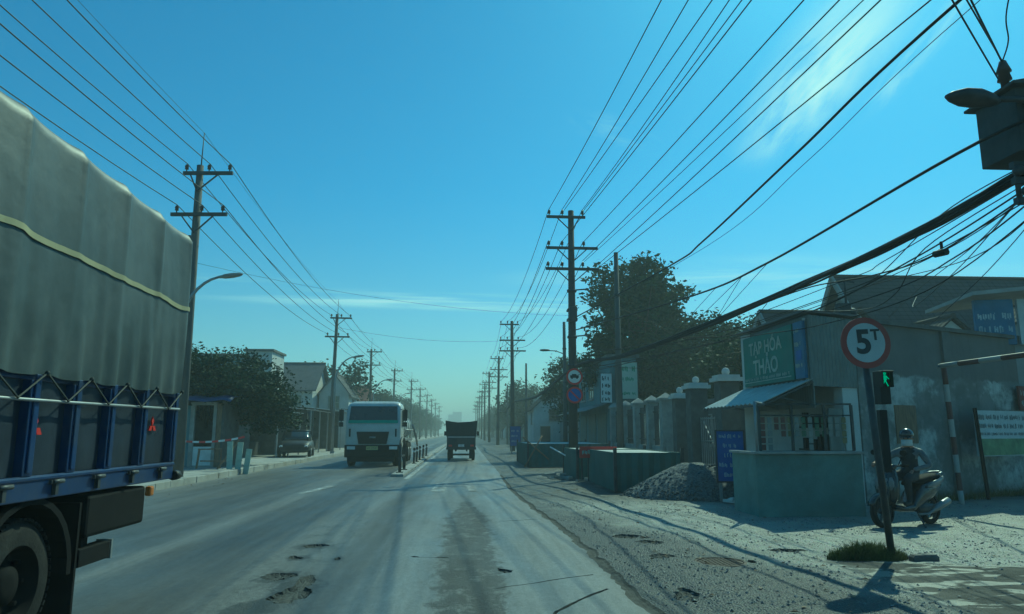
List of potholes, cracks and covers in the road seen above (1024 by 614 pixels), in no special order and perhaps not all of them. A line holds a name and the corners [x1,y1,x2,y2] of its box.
pothole [265,575,316,604]
manhole cover [694,557,747,567]
pothole [673,588,700,602]
pothole [260,573,298,581]
